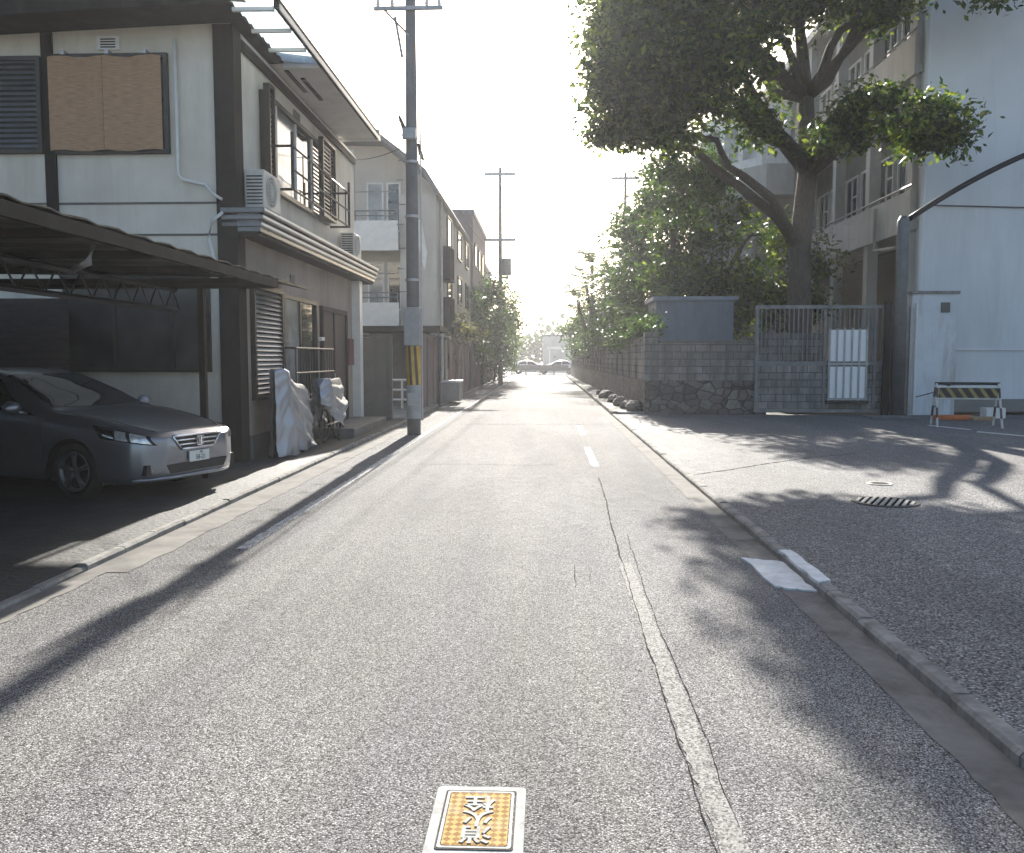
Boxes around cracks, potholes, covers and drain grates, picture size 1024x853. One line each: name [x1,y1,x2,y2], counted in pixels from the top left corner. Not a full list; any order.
crack [598,477,740,853]
manhole cover [422,786,526,853]
